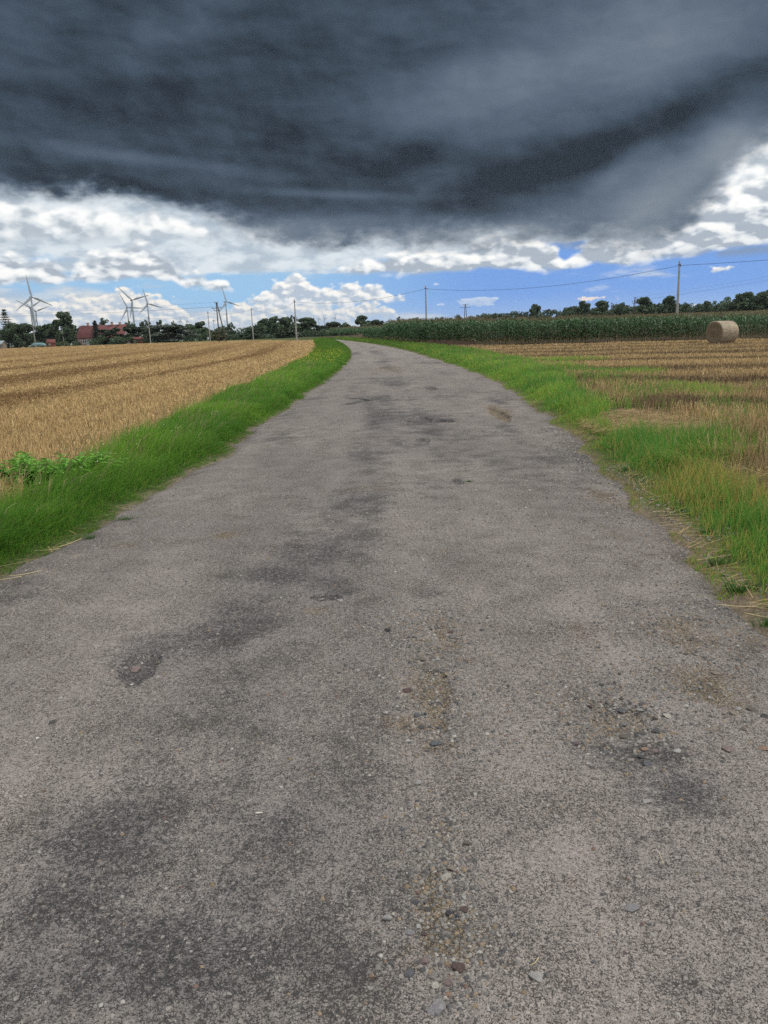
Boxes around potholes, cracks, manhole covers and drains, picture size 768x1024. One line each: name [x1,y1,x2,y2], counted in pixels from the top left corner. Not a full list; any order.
pothole [485,407,514,423]
pothole [115,650,162,687]
